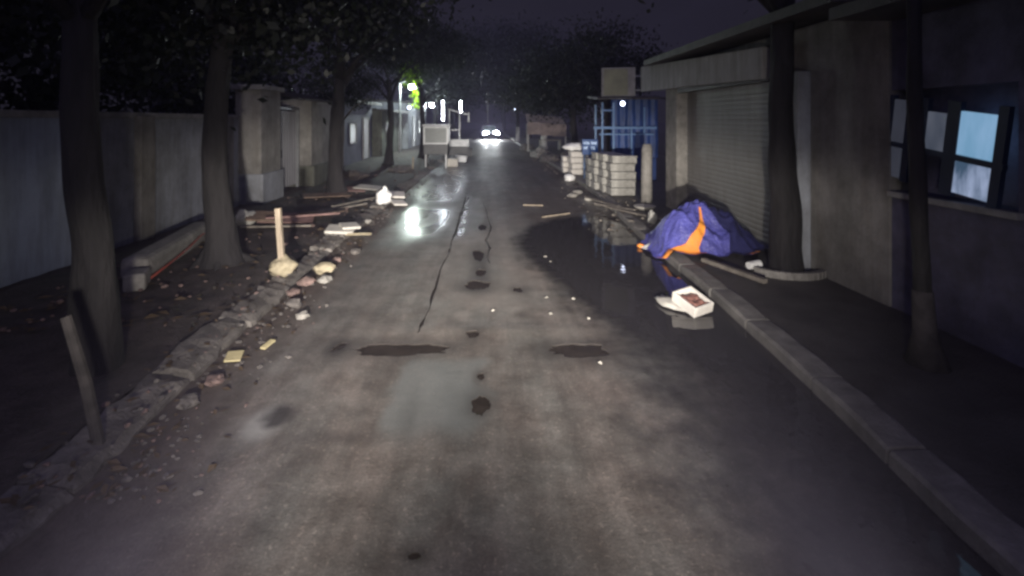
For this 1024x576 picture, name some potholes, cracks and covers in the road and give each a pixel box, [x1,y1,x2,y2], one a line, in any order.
pothole [547,343,610,358]
crack [418,195,492,333]
pothole [350,343,451,356]
pothole [471,395,491,416]
pothole [464,280,491,290]
